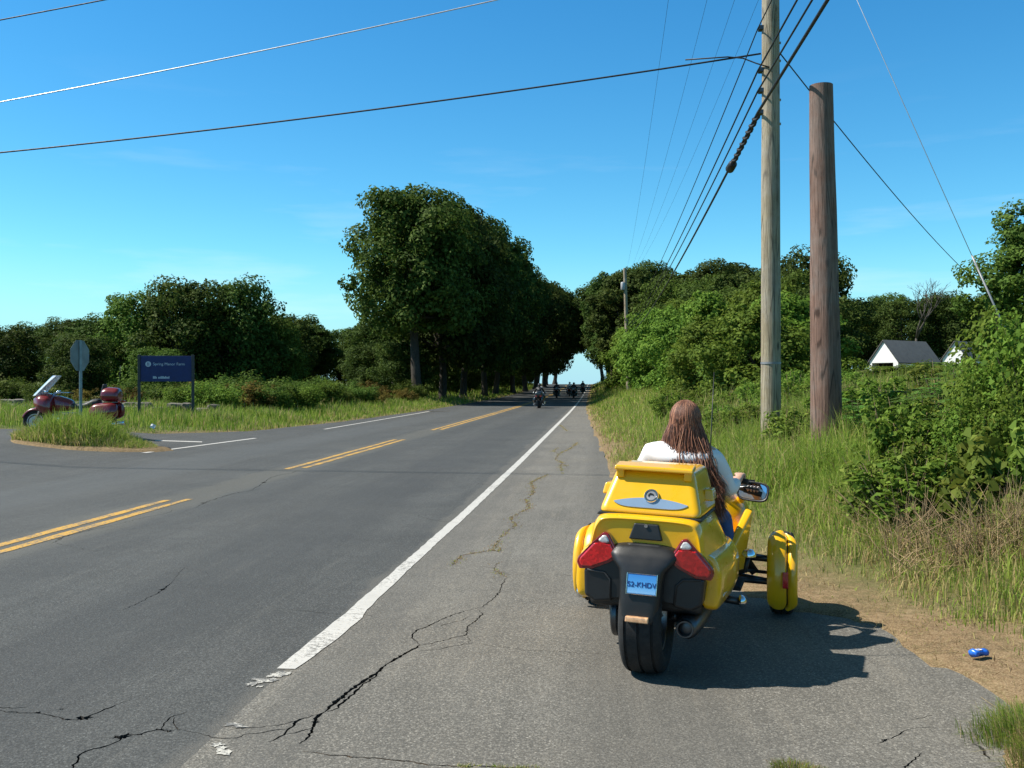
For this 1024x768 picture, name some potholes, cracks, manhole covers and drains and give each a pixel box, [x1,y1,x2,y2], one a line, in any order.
crack [880,716,934,768]
crack [0,425,601,768]
